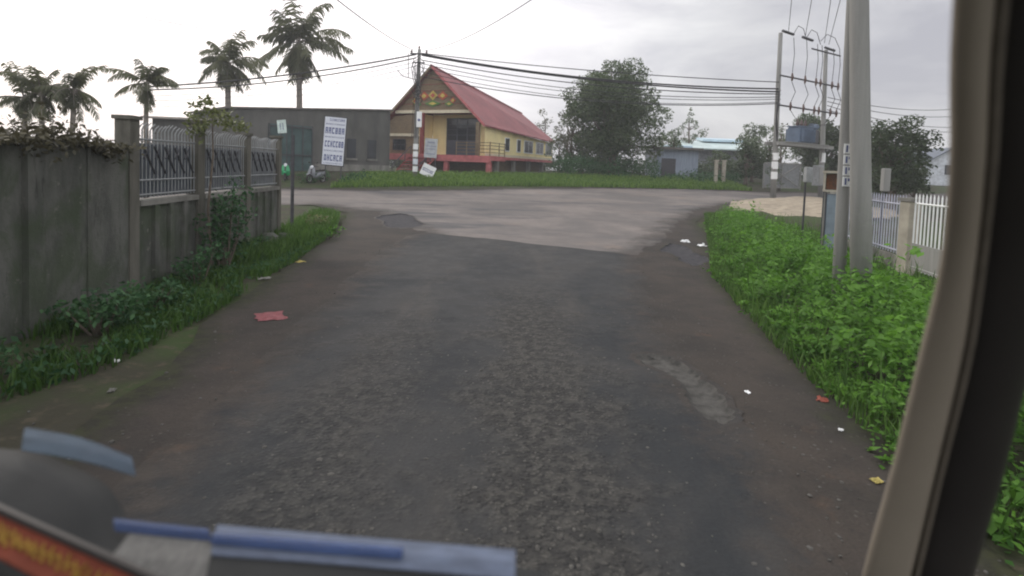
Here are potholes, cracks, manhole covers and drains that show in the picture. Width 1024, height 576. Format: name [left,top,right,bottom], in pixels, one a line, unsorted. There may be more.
pothole [374,213,425,228]
